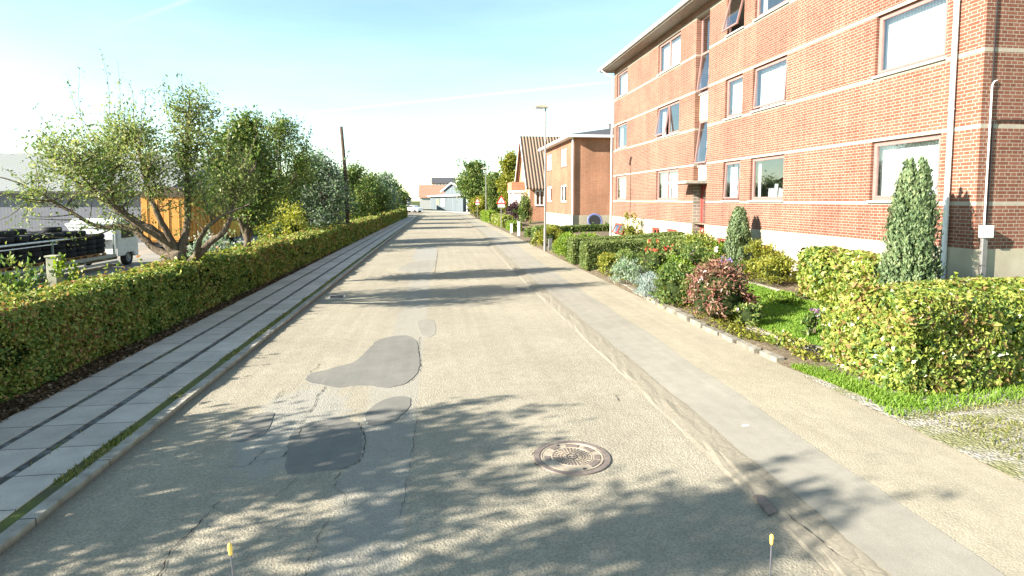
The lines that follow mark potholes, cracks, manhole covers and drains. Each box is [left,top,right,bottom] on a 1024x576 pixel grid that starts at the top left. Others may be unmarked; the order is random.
manhole cover [534,440,611,476]
crack [305,424,366,576]
crack [157,498,226,576]
